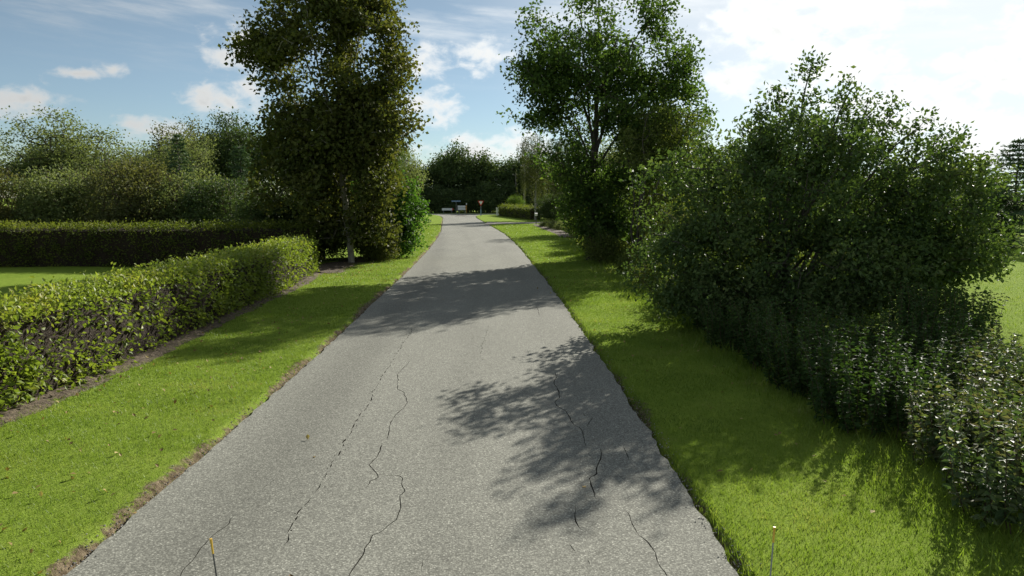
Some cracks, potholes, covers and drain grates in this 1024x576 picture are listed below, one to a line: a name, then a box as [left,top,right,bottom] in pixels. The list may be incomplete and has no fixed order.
crack [349,362,409,576]
crack [622,448,667,576]
crack [554,373,602,565]
